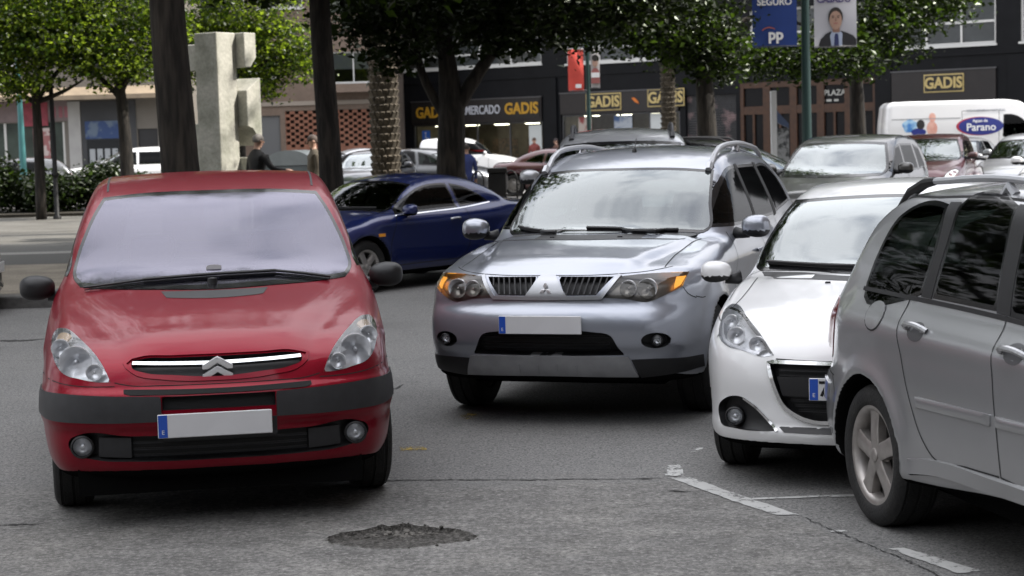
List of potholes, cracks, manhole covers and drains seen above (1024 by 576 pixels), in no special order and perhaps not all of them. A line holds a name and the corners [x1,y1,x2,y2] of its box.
pothole [325,522,478,549]
crack [800,514,939,576]
